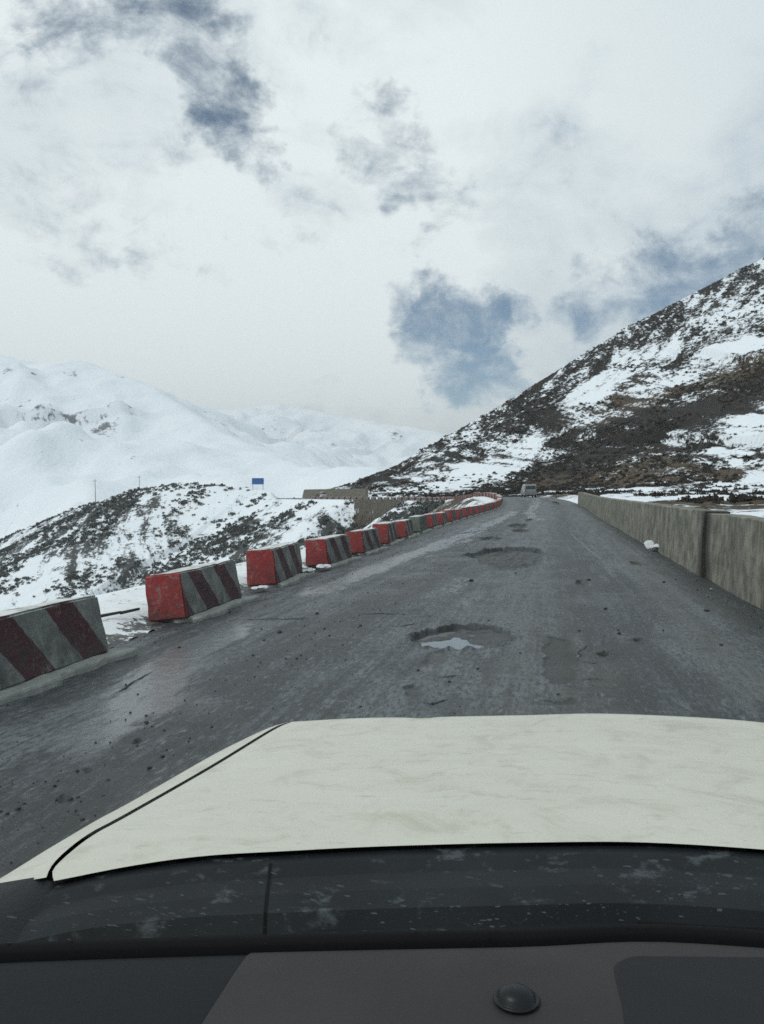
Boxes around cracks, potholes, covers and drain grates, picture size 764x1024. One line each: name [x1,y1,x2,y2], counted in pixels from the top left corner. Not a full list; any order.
pothole [410,623,517,647]
pothole [463,546,543,570]
